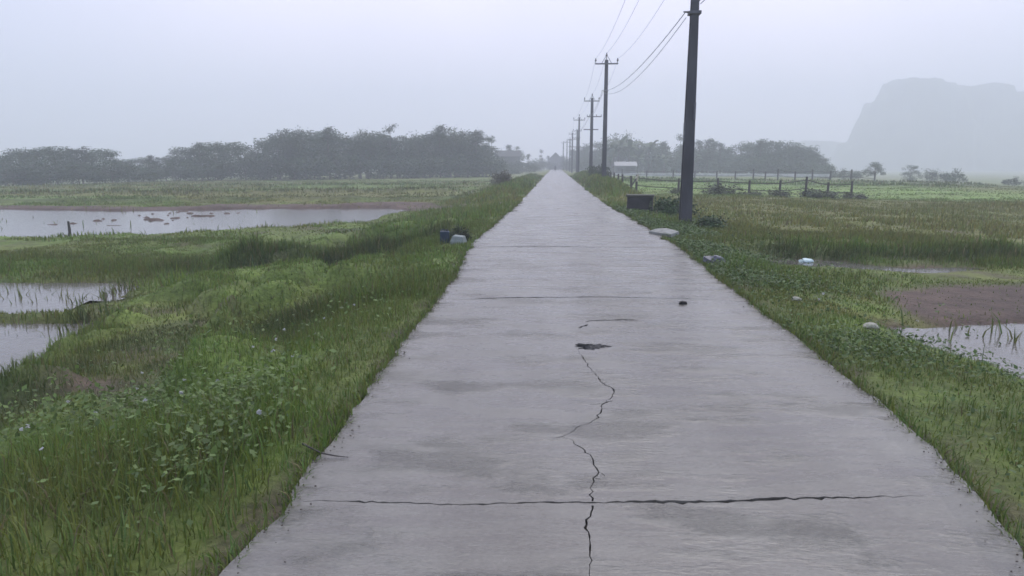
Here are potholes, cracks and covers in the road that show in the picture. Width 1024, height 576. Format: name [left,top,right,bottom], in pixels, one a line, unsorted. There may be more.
crack [573,358,614,576]
